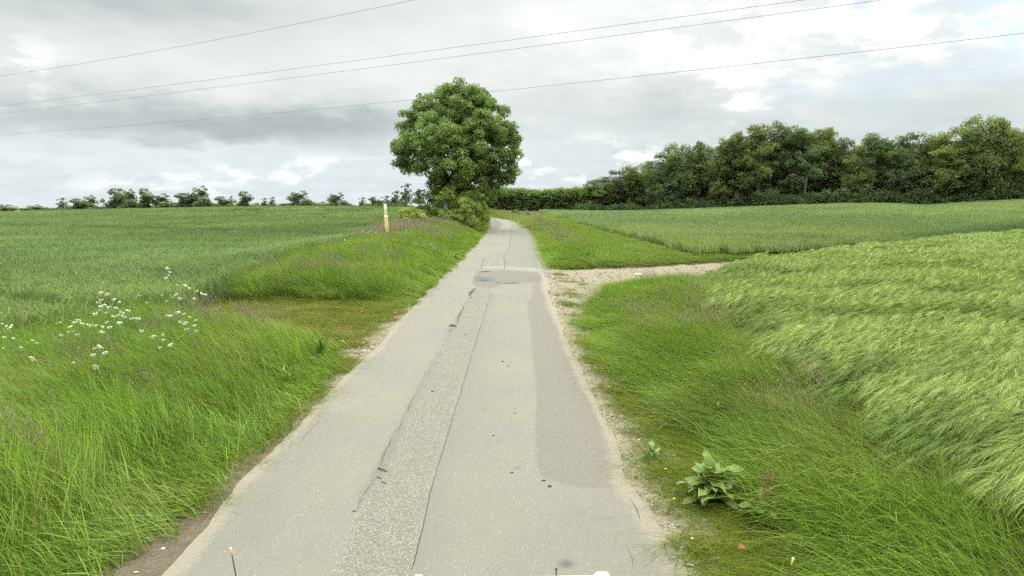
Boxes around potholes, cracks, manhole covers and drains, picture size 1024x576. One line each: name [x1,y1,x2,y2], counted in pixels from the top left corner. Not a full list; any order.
crack [411,292,492,571]
crack [358,395,416,507]
